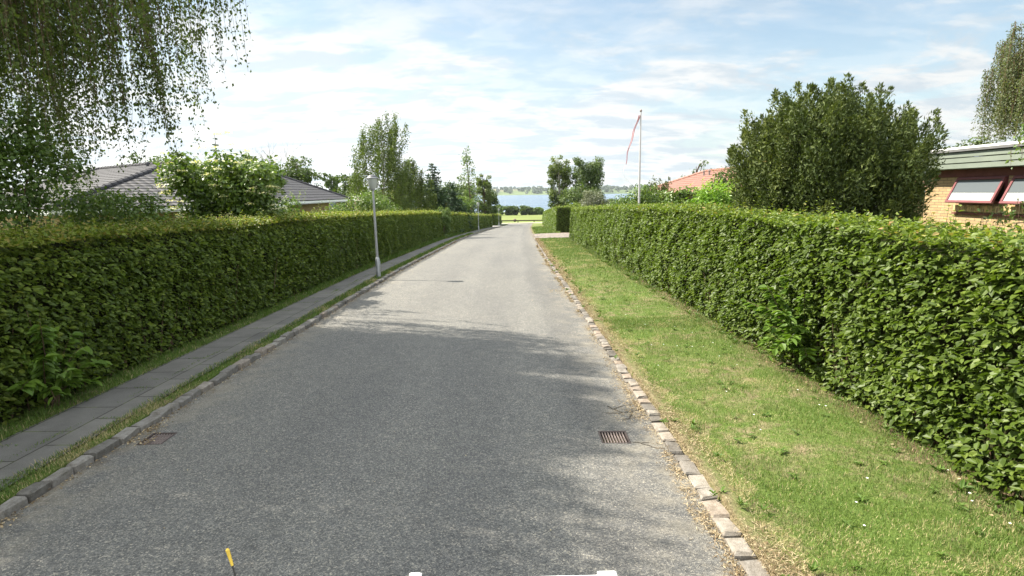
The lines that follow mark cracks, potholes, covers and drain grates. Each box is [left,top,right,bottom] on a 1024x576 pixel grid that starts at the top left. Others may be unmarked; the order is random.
drain grate [598,431,632,444]
drain grate [137,432,178,445]
